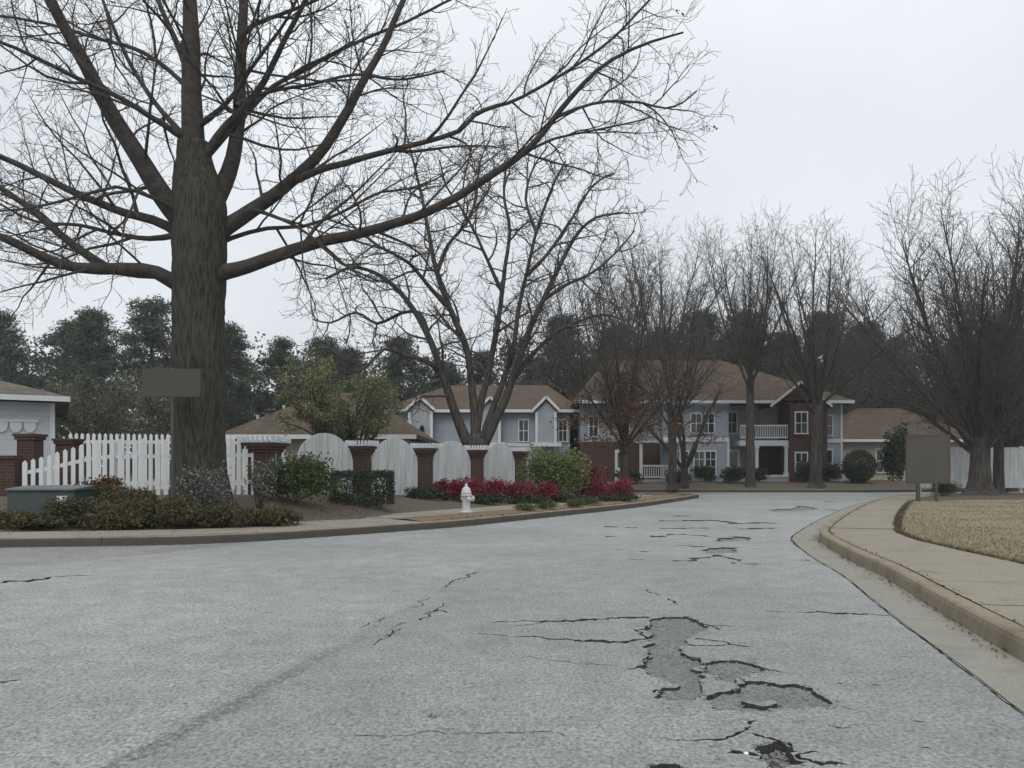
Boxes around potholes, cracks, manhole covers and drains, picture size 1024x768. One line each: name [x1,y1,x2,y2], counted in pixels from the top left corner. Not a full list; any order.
pothole [703,678,839,712]
pothole [750,741,808,768]
crack [1,575,86,583]
crack [479,589,750,700]
pothole [641,614,709,709]
crack [357,597,448,646]
crack [603,501,1024,715]
